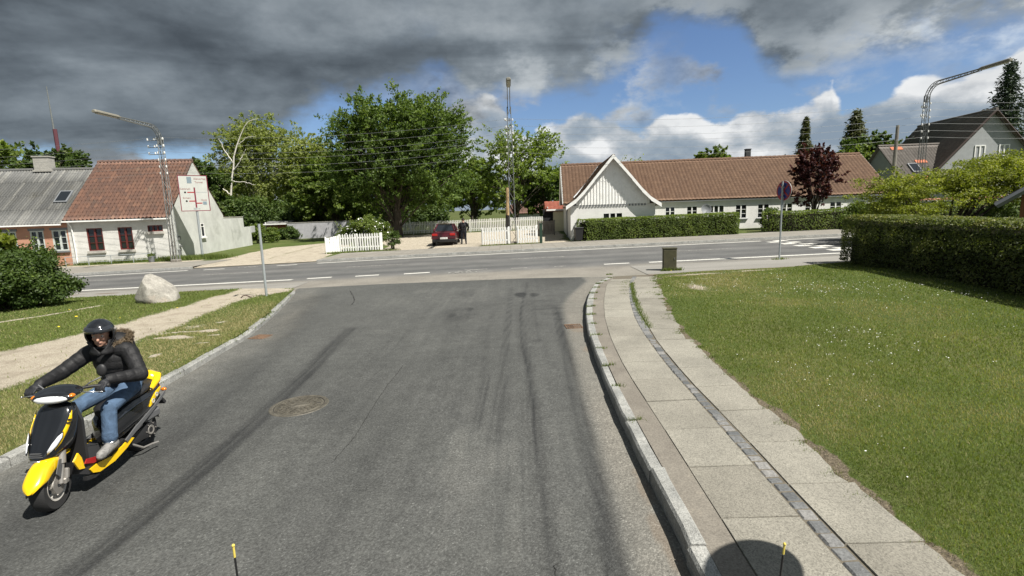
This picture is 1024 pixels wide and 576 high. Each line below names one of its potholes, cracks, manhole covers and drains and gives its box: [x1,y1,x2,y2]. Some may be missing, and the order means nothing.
manhole cover [268,395,329,417]
